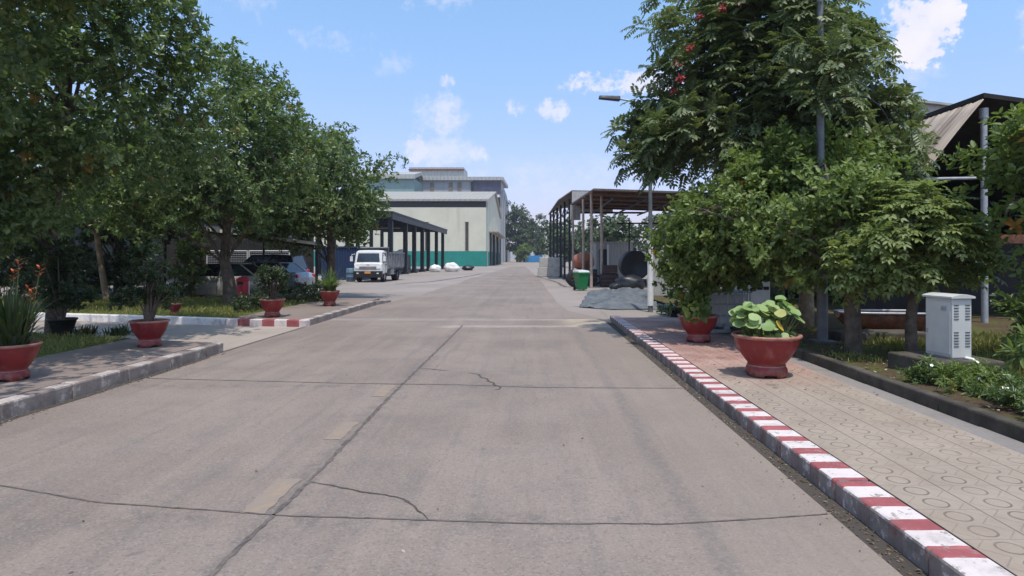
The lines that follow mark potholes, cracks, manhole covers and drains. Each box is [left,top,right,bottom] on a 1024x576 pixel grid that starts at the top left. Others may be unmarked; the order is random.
crack [311,481,429,520]
